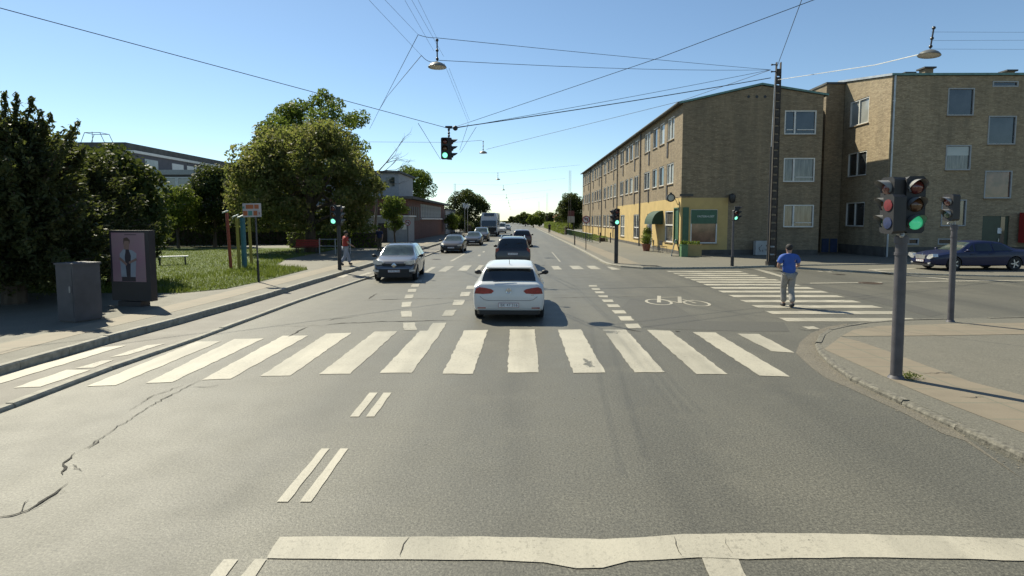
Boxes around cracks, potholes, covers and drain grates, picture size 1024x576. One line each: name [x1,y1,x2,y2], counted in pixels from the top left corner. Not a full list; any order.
crack [0,383,216,517]
